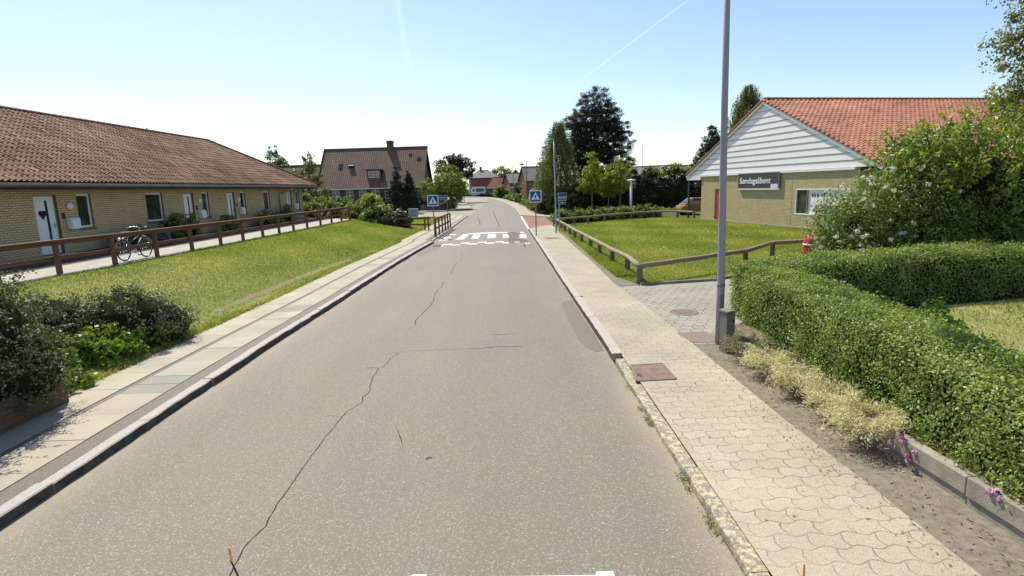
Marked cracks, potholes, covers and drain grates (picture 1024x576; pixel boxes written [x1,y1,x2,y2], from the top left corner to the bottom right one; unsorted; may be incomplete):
crack [229,334,520,576]
manhole cover [630,363,677,383]
